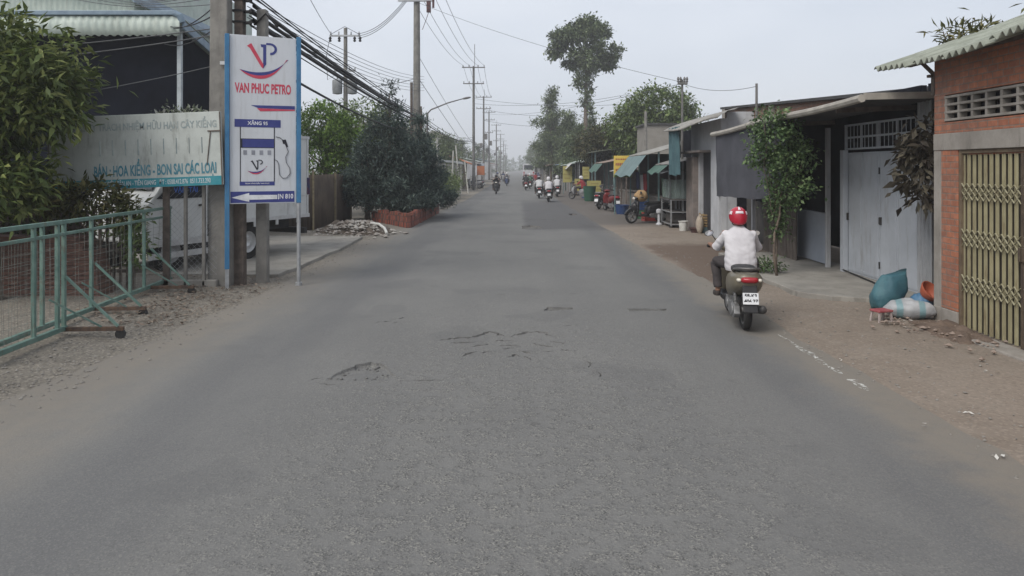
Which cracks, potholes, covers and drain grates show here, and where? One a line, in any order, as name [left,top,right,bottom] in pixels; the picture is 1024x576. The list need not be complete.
crack [442,325,602,377]
pothole [327,362,396,382]
